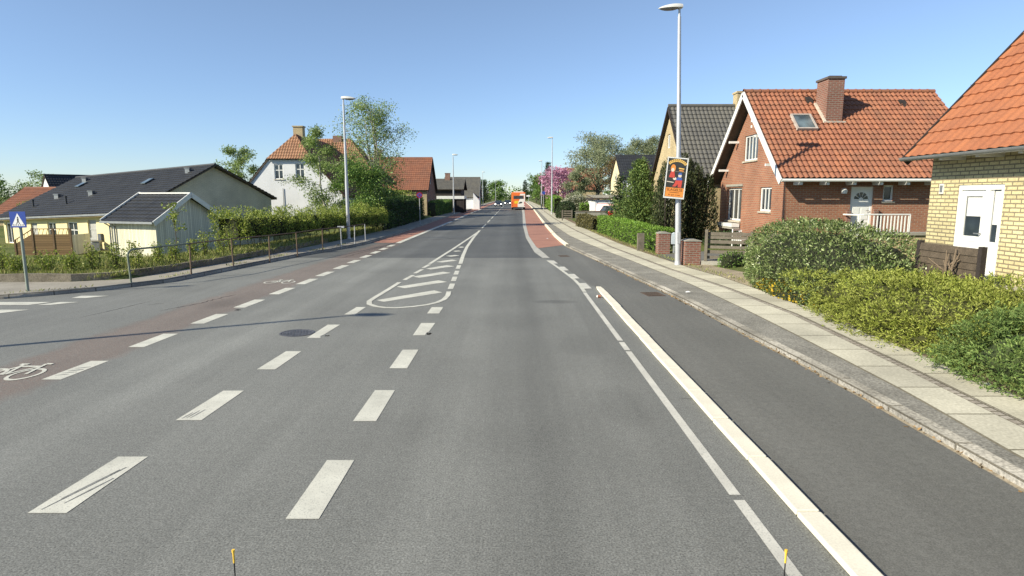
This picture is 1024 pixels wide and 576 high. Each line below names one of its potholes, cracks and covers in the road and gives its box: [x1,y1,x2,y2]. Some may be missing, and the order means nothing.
manhole cover [279,329,315,337]
